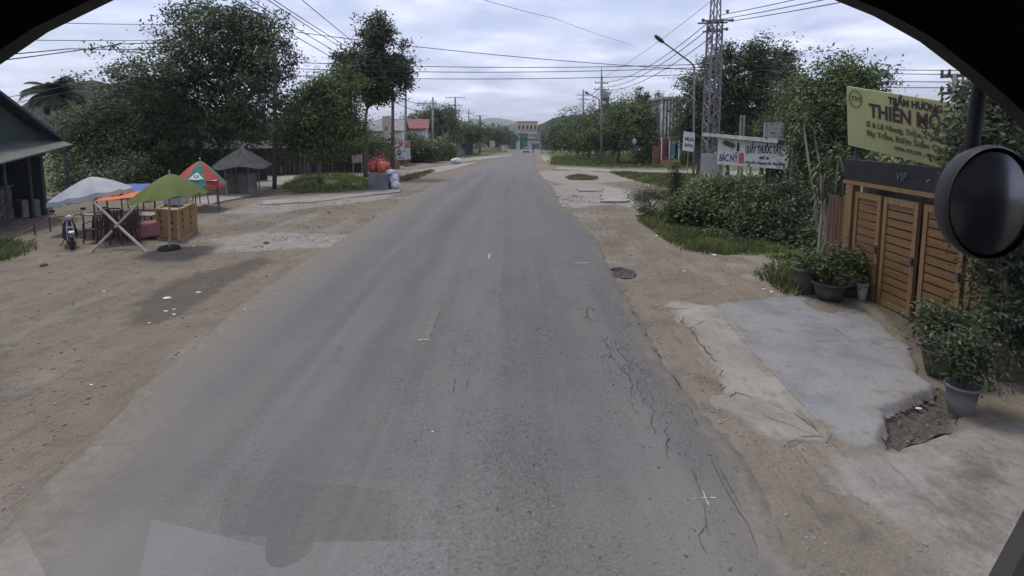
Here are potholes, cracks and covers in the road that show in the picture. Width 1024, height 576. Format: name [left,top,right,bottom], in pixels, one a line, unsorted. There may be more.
pothole [883,387,959,451]
crack [600,309,699,457]
